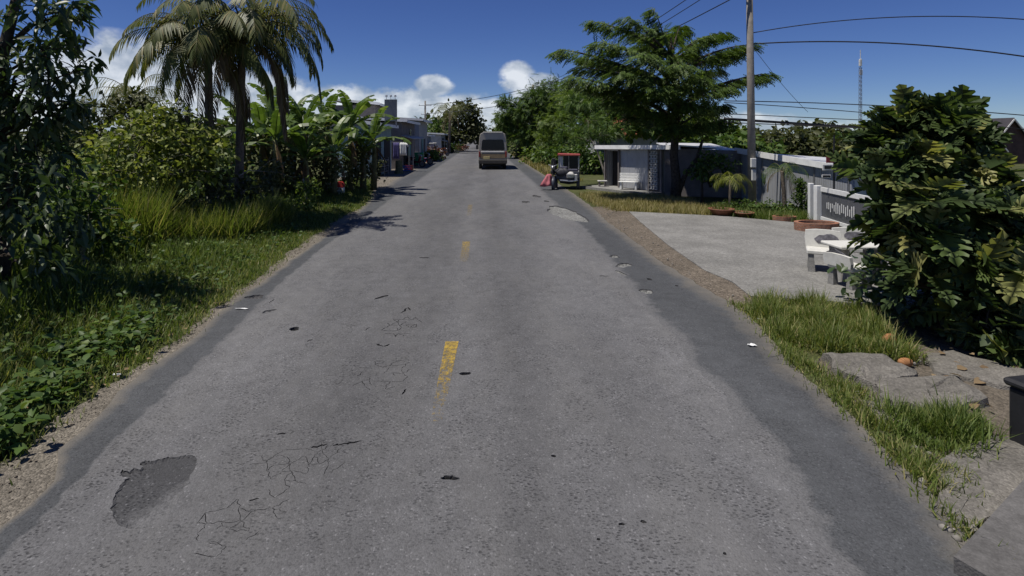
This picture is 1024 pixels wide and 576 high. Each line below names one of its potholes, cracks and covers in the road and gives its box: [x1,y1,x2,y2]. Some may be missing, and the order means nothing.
crack [354,295,418,394]
crack [195,433,359,557]
